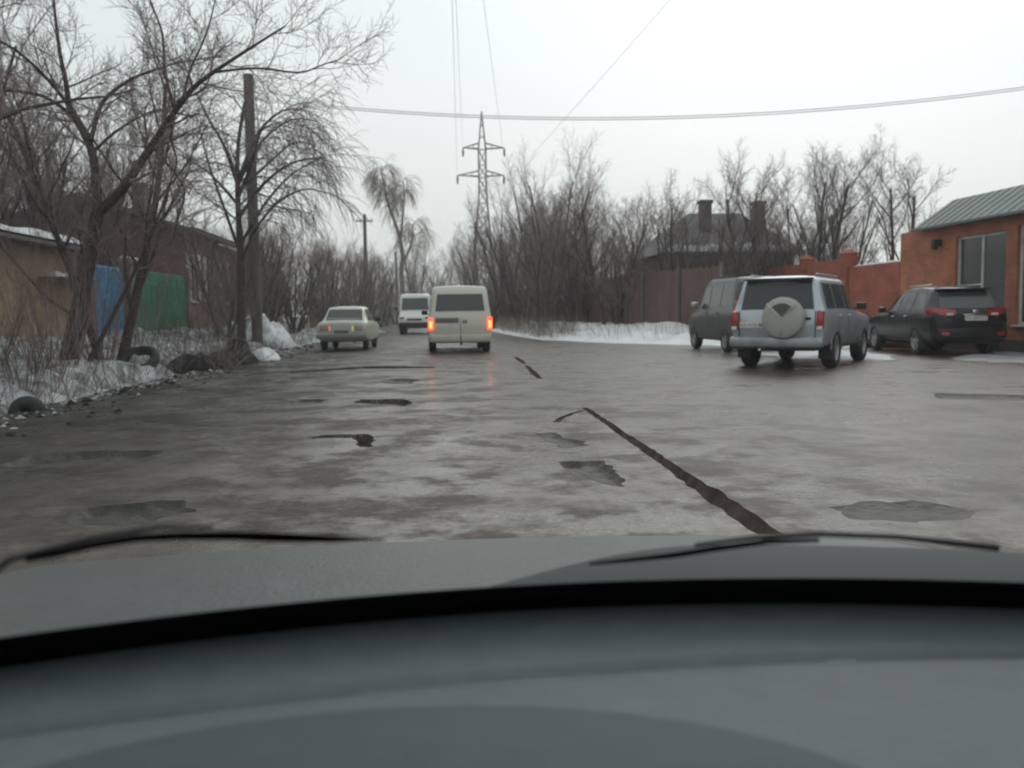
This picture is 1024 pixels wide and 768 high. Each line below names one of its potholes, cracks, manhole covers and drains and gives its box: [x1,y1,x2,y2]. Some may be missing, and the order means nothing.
pothole [535,432,588,449]
pothole [312,434,376,447]
pothole [557,460,626,487]
